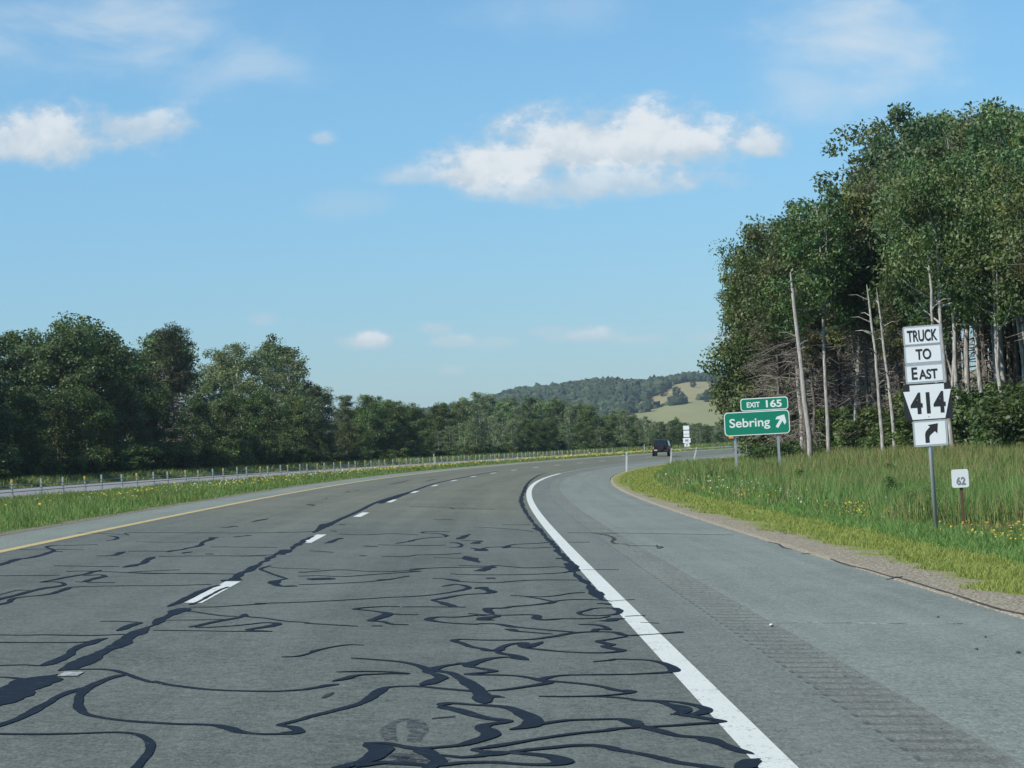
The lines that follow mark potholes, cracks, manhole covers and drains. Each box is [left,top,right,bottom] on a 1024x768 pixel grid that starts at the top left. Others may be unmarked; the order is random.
crack [599,533,723,549]
crack [830,559,1024,615]
